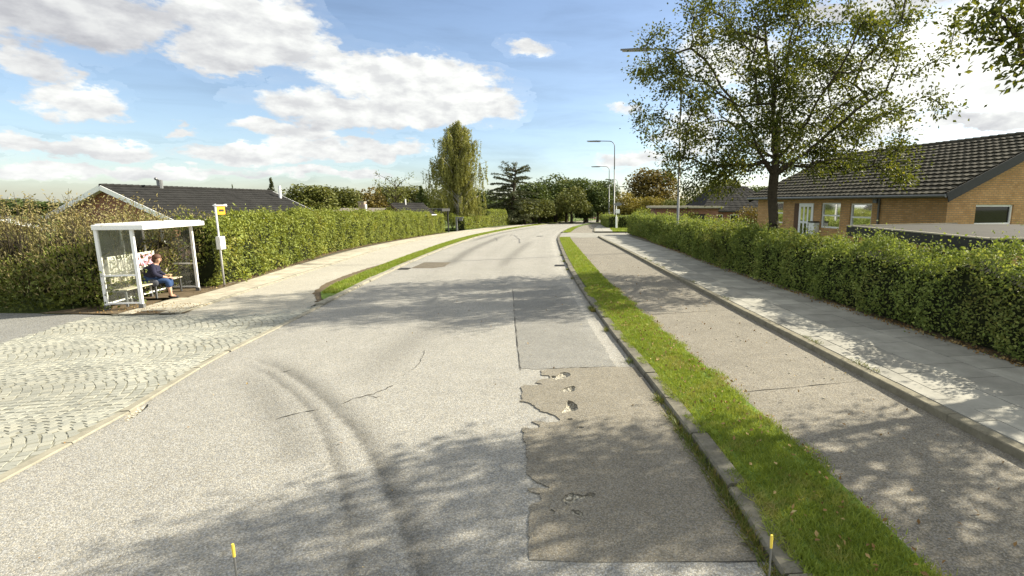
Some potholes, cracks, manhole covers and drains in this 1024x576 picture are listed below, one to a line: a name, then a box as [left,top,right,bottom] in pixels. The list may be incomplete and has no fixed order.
pothole [561,400,578,413]
pothole [562,492,596,505]
